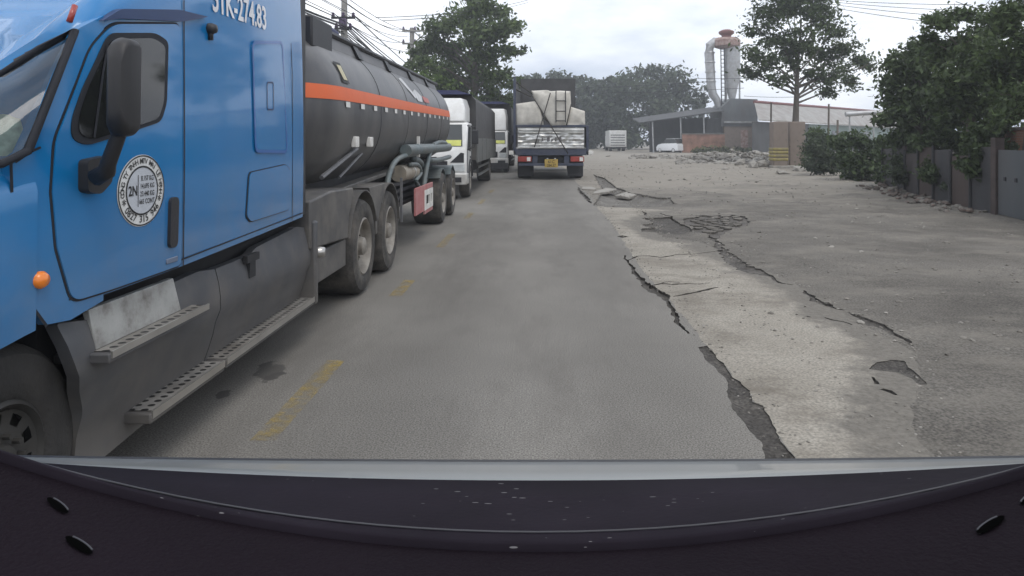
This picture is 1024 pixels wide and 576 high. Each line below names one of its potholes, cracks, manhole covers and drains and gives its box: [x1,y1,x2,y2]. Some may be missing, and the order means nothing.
pothole [869,360,927,385]
crack [623,212,914,346]
